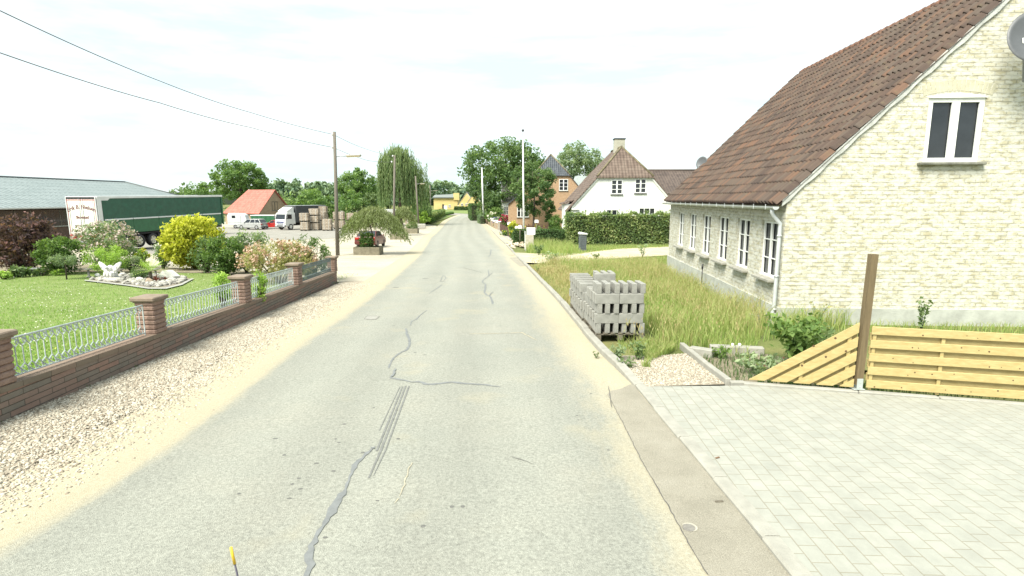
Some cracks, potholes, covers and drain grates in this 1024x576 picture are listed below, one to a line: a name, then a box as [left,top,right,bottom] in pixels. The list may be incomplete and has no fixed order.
manhole cover [682,523,698,532]
